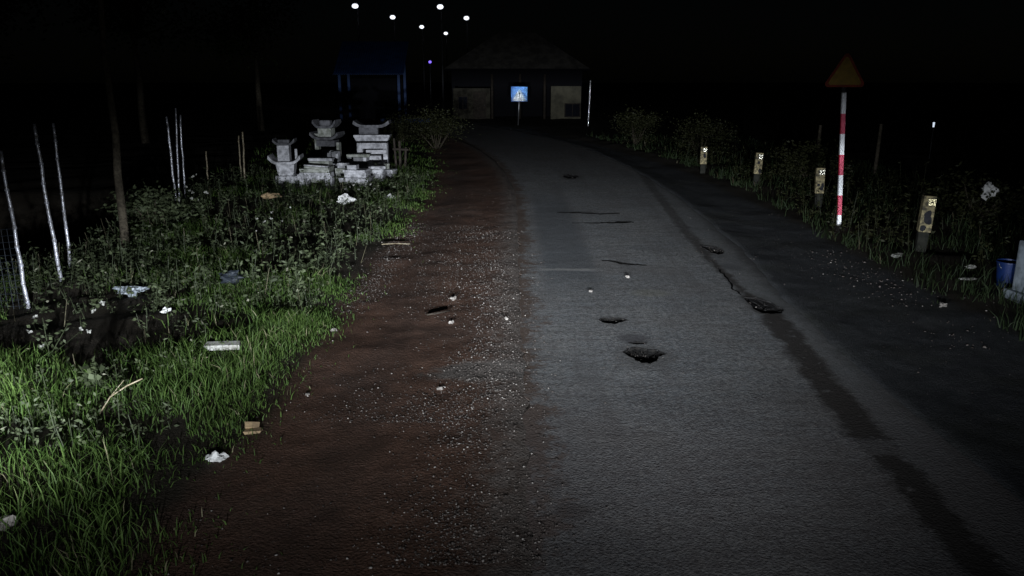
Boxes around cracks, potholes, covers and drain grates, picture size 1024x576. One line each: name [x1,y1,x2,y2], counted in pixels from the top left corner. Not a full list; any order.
pothole [623,347,667,364]
crack [719,269,742,295]
pothole [744,297,784,314]
crack [557,212,634,224]
pothole [701,245,724,255]
